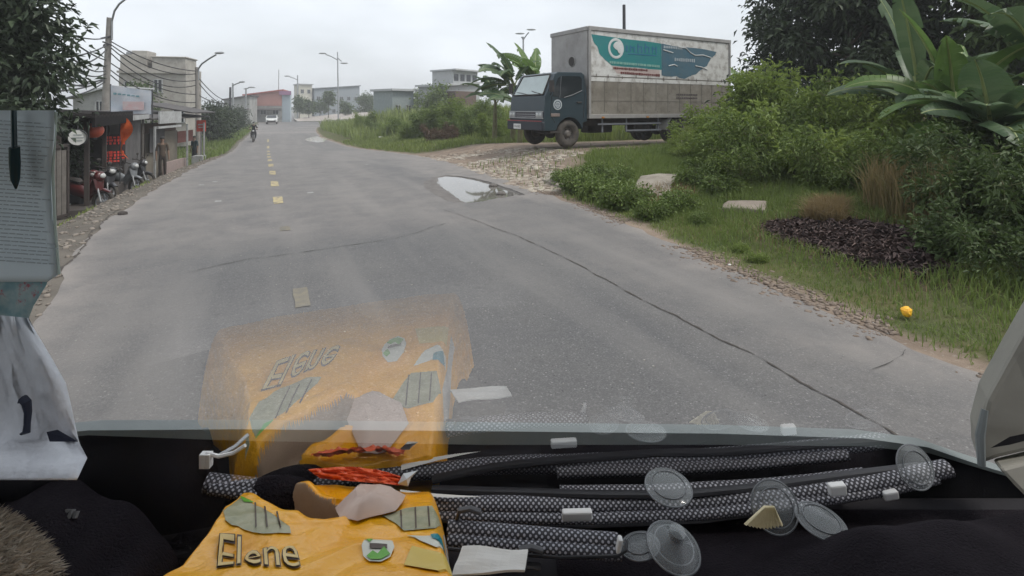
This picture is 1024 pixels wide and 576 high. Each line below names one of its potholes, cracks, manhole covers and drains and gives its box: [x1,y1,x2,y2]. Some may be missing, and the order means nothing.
crack [446,210,898,435]
pothole [423,175,525,203]
